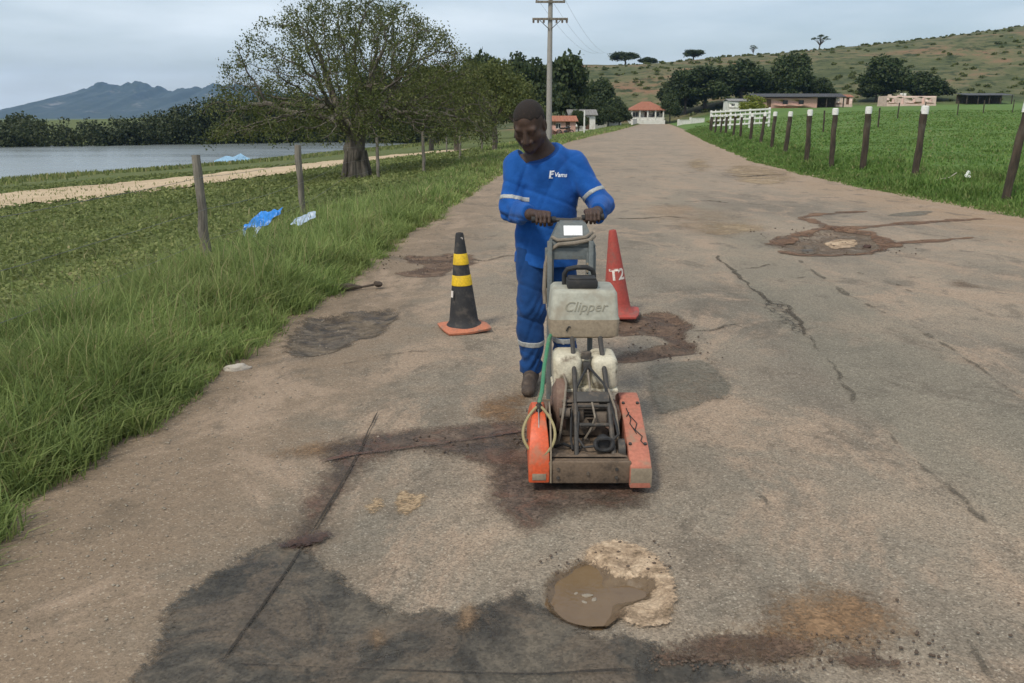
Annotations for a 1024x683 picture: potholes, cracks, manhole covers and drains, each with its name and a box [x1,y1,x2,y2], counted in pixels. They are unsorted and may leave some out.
pothole [583,538,679,628]
crack [715,255,987,521]
